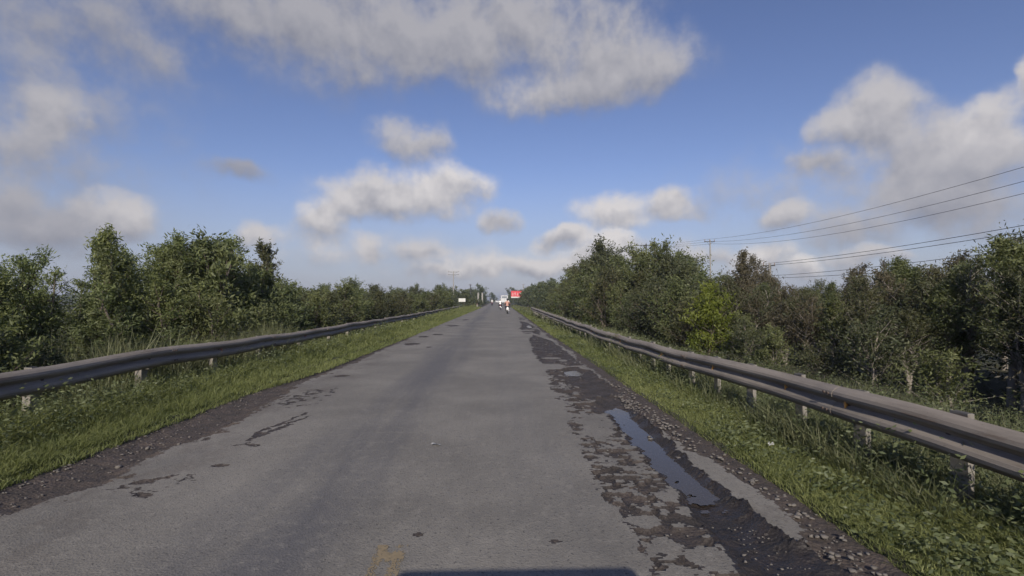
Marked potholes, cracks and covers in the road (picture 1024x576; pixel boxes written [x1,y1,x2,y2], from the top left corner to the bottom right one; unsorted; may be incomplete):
pothole [106,474,197,497]
pothole [276,388,338,408]
pothole [567,417,740,576]
pothole [545,367,647,417]
pothole [519,321,541,335]
